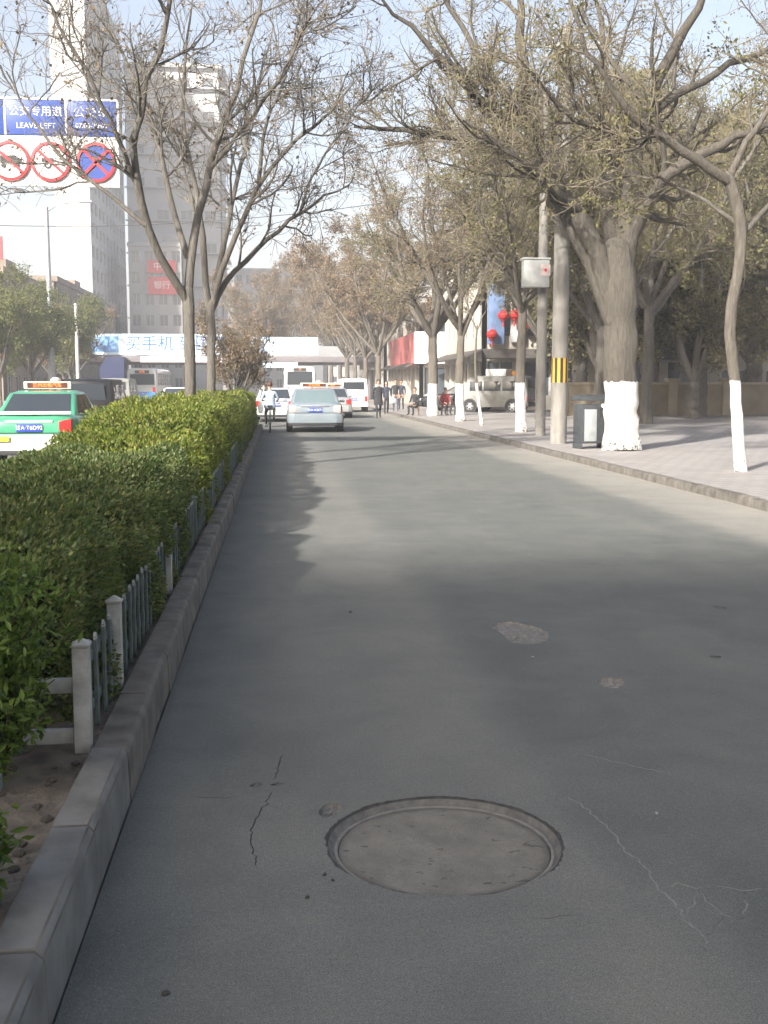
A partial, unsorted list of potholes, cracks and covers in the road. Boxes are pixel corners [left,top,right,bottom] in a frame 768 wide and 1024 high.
manhole cover [324,796,565,897]
crack [249,756,282,865]
